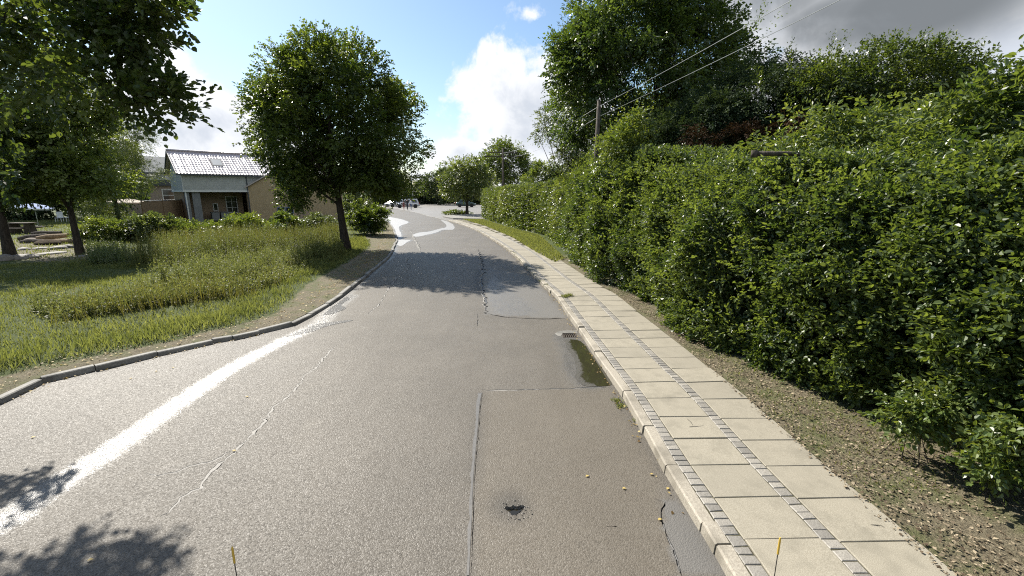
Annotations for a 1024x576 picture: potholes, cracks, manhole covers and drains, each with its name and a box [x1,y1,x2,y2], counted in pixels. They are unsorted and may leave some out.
pothole [501,500,533,520]
crack [661,503,682,576]
crack [146,345,337,521]
drain grate [555,330,578,338]
crack [477,250,562,326]
